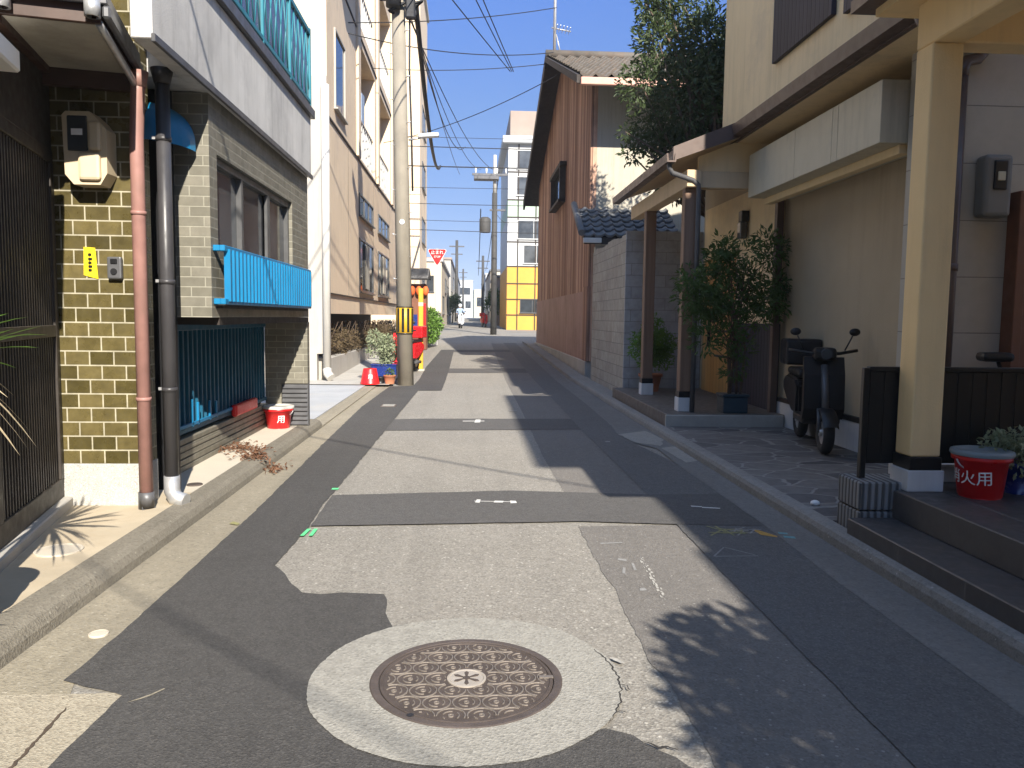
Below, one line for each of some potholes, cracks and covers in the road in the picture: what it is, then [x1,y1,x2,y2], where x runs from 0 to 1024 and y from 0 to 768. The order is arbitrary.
crack [594,649,630,723]
crack [8,707,66,768]
manhole cover [369,639,562,729]
